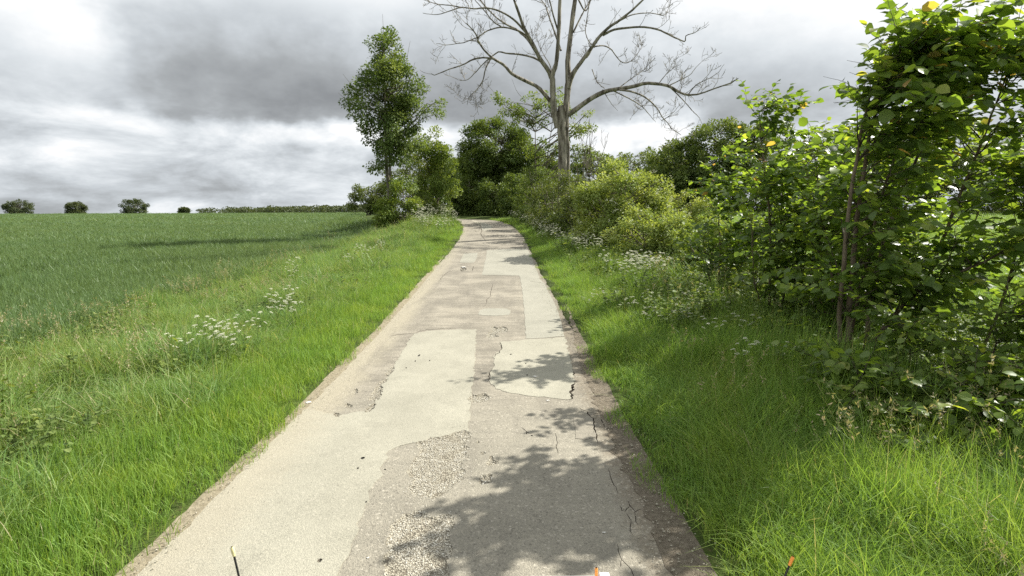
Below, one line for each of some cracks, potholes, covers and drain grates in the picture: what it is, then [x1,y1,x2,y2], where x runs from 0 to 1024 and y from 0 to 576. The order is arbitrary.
pothole [396,426,480,505]
pothole [372,505,463,576]
crack [609,471,640,576]
crack [569,372,605,442]
